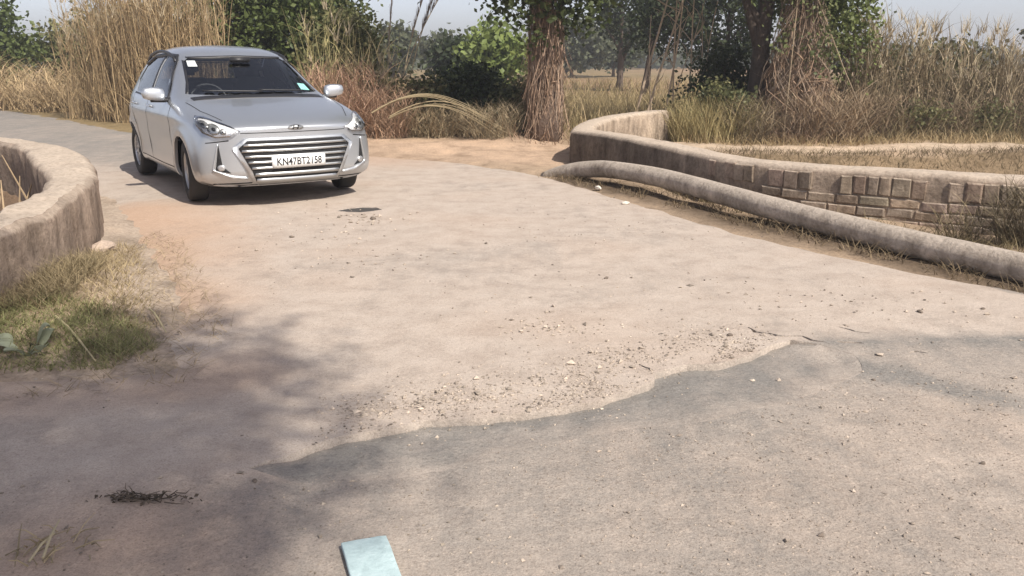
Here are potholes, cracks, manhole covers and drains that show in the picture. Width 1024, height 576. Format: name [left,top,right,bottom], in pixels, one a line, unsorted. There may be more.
crack [747,327,868,343]
